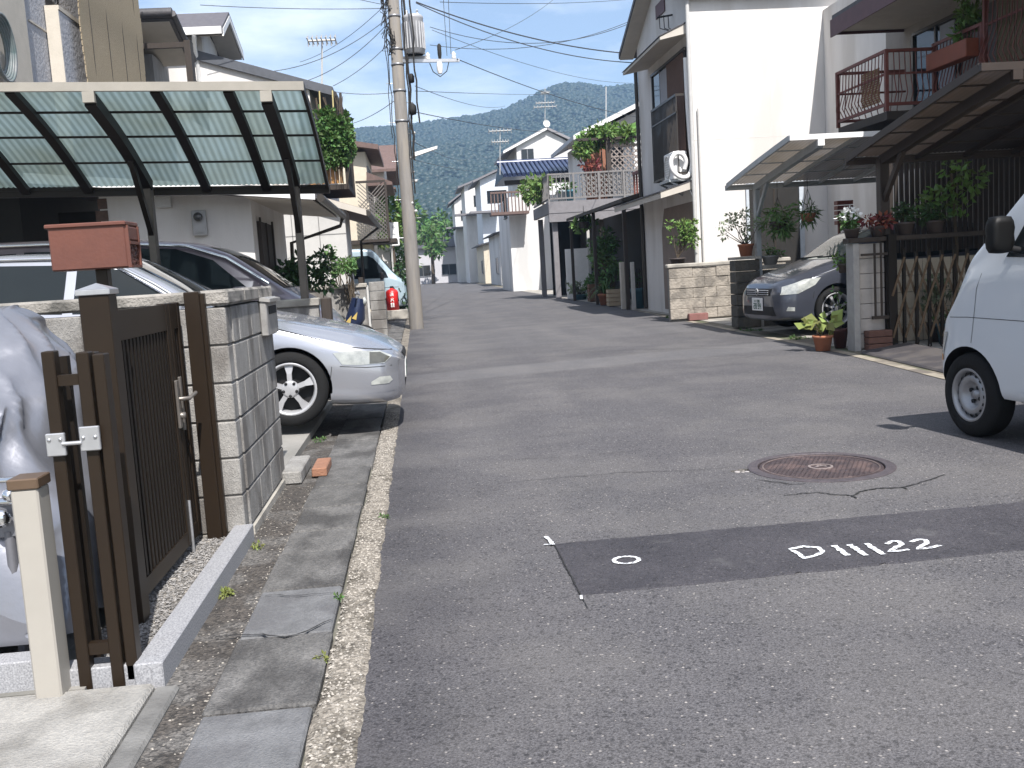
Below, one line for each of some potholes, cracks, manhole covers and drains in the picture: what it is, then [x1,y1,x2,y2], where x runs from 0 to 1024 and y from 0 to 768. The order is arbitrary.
crack [757,474,945,498]
crack [216,619,331,638]
manhole cover [747,452,897,483]
